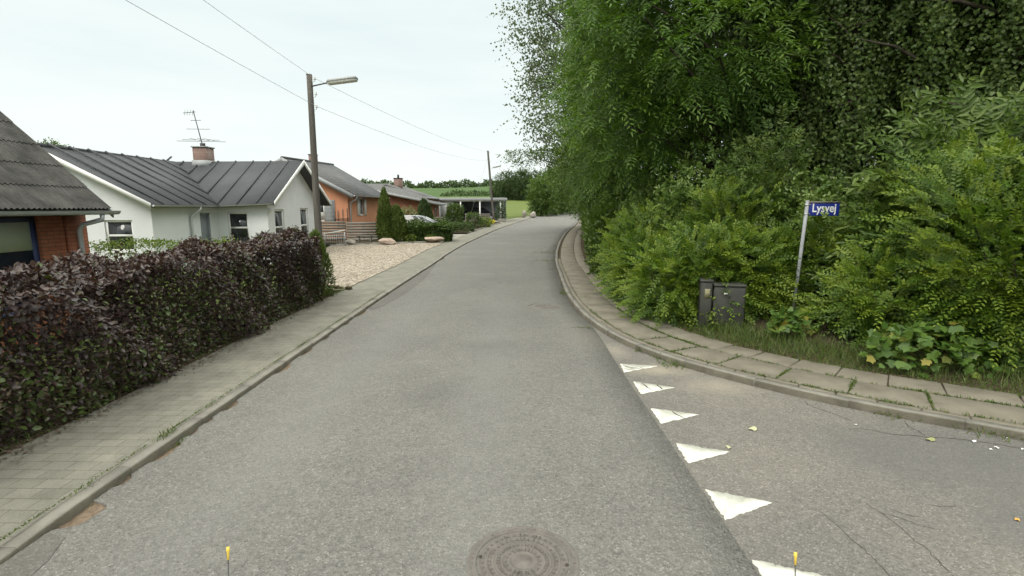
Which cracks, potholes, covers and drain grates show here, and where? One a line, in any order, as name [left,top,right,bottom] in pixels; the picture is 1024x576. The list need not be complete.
crack [867,421,1024,449]
manhole cover [466,526,580,576]
crack [867,504,956,573]
crack [821,512,890,576]
pothole [57,502,106,529]
